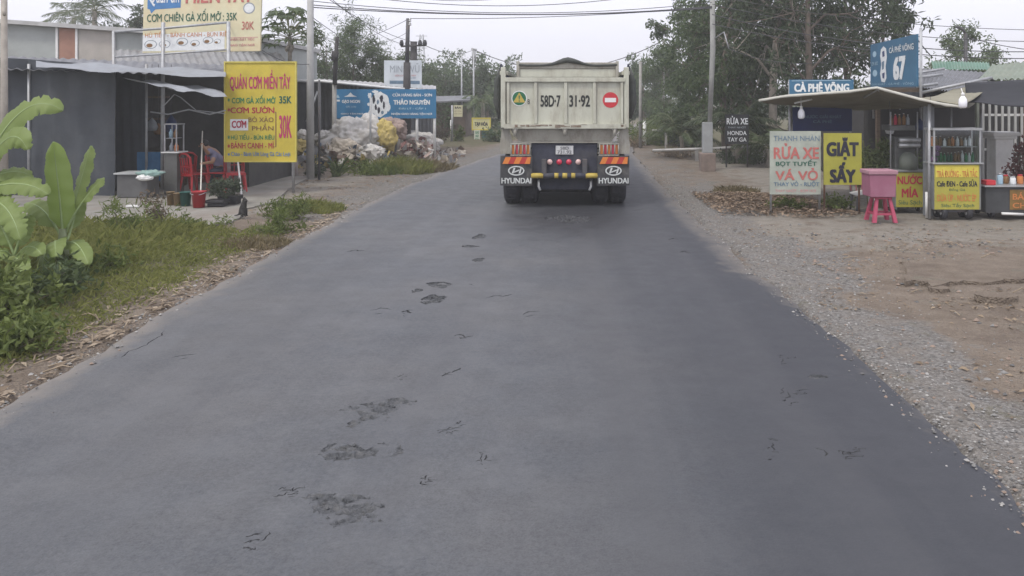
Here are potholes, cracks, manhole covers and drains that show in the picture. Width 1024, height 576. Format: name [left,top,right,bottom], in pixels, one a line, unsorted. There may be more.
crack [816,447,865,459]
pothole [420,294,446,304]
crack [243,532,271,551]
pothole [338,397,417,429]
pothole [301,490,391,528]
pothole [318,442,404,461]
crack [273,485,305,497]
